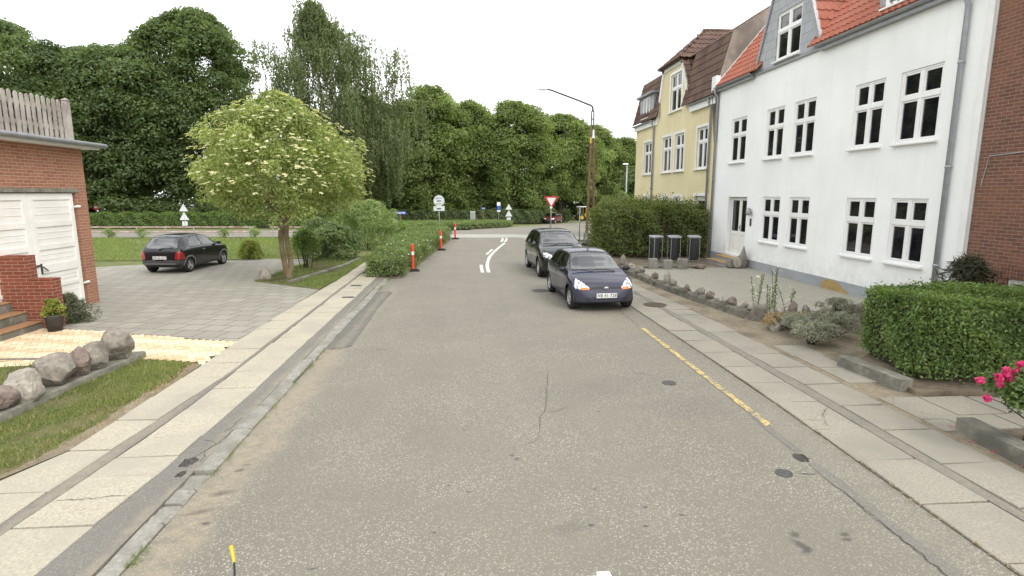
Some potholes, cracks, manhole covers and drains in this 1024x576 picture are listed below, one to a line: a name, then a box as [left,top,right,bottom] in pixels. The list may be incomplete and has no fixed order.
manhole cover [775,469,793,478]
